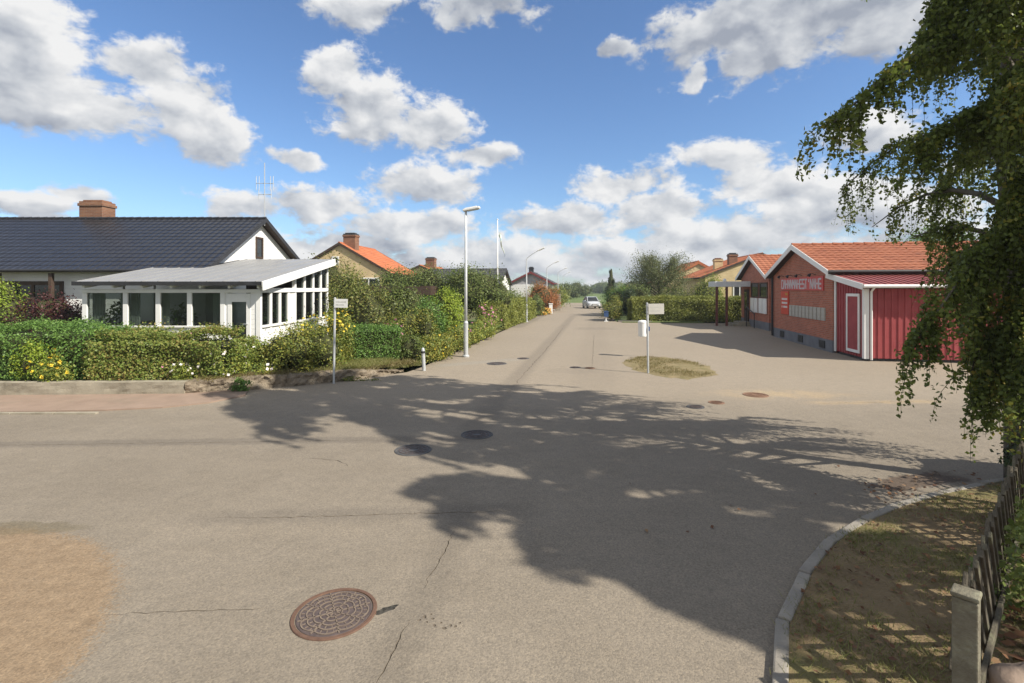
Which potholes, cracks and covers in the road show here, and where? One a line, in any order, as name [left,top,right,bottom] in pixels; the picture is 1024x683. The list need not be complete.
manhole cover [461,430,493,439]
crack [423,534,452,590]
manhole cover [290,588,377,641]
manhole cover [394,444,432,456]
crack [376,623,409,683]
